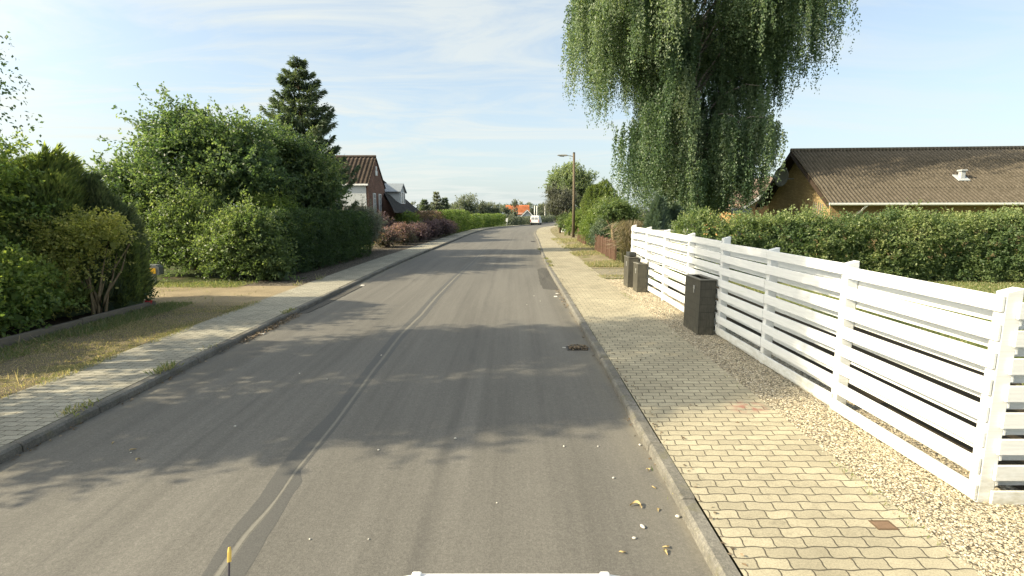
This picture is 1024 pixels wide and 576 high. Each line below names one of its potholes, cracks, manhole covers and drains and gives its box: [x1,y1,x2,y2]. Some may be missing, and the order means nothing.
utility cover [868,520,900,530]
